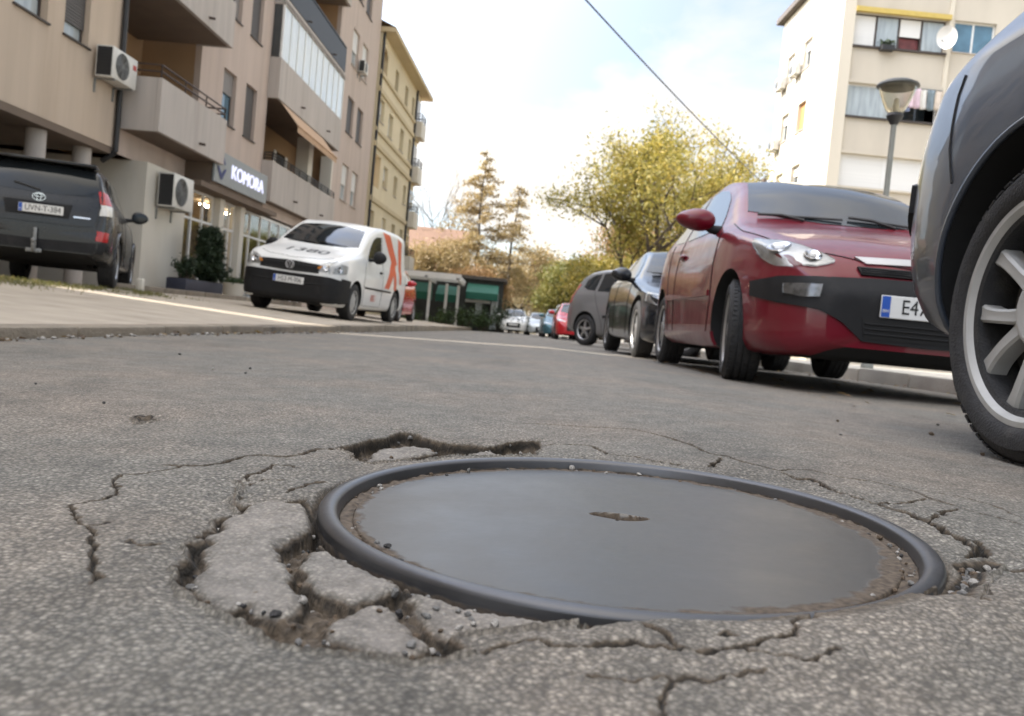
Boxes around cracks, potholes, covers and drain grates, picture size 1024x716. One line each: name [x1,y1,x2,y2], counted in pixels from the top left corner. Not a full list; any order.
pothole [162,478,579,669]
pothole [127,415,163,425]
crack [64,447,336,586]
crack [473,607,856,716]
manhole cover [316,457,947,628]
crack [521,423,1024,573]
